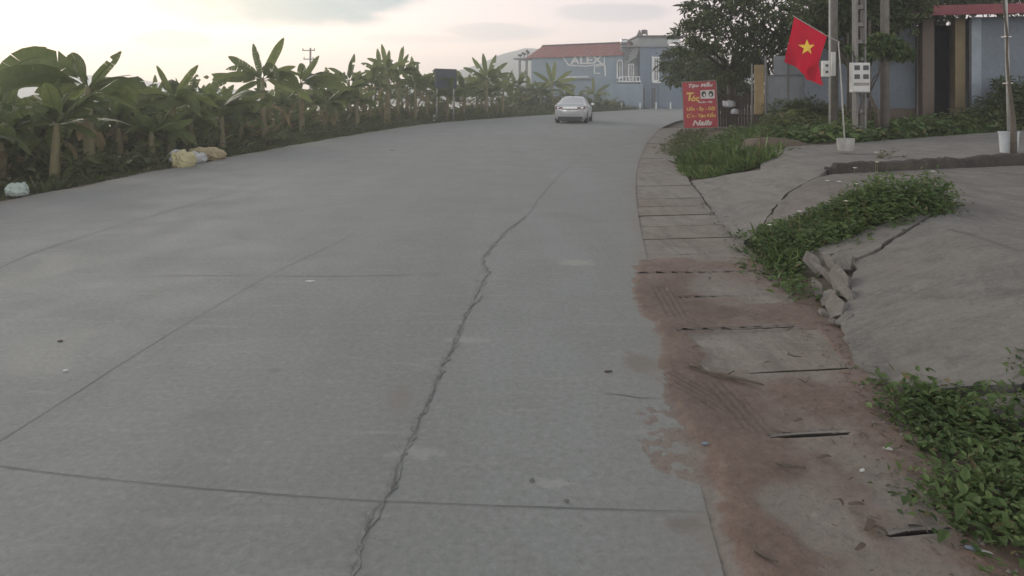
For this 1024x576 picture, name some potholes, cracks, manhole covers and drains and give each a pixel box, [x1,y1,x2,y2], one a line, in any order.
crack [348,153,588,576]
